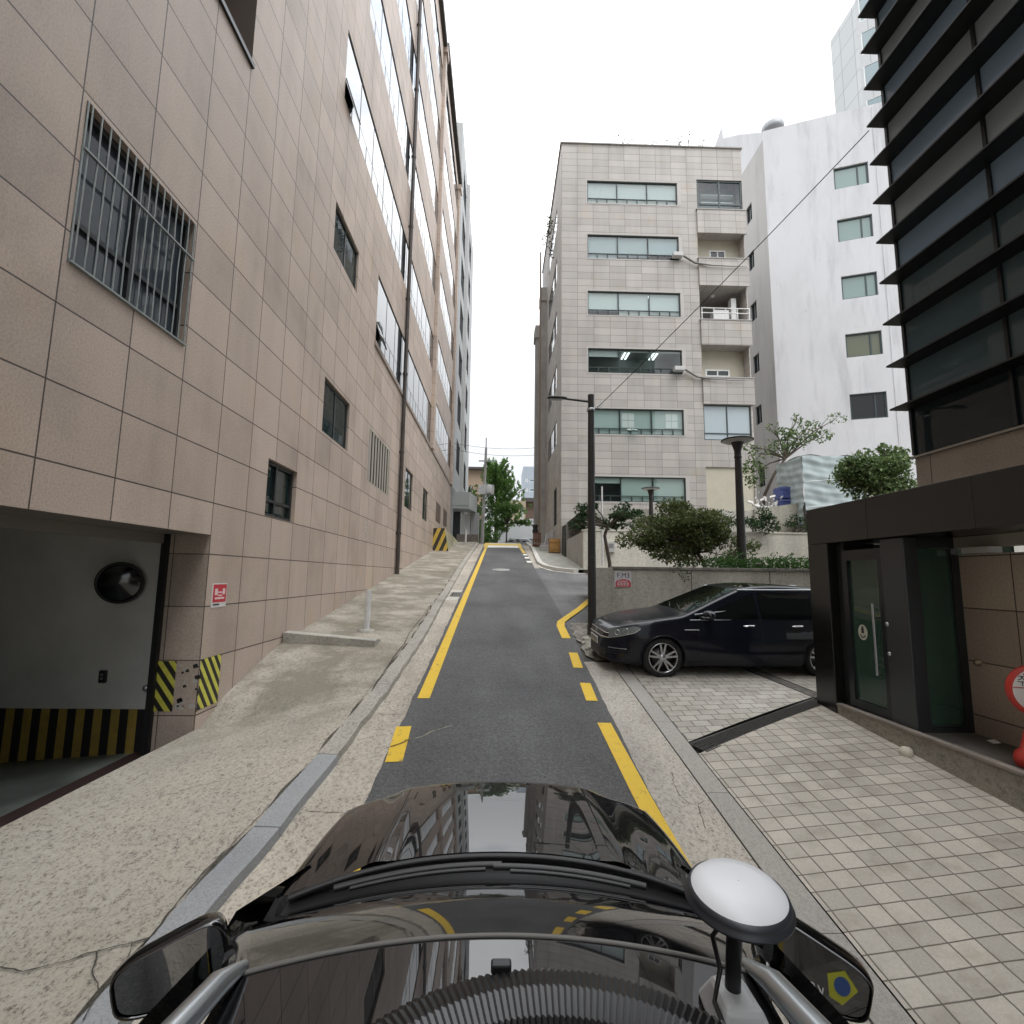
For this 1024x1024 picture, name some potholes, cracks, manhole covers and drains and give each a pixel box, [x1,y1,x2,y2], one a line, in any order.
crack [0,763,308,1020]
